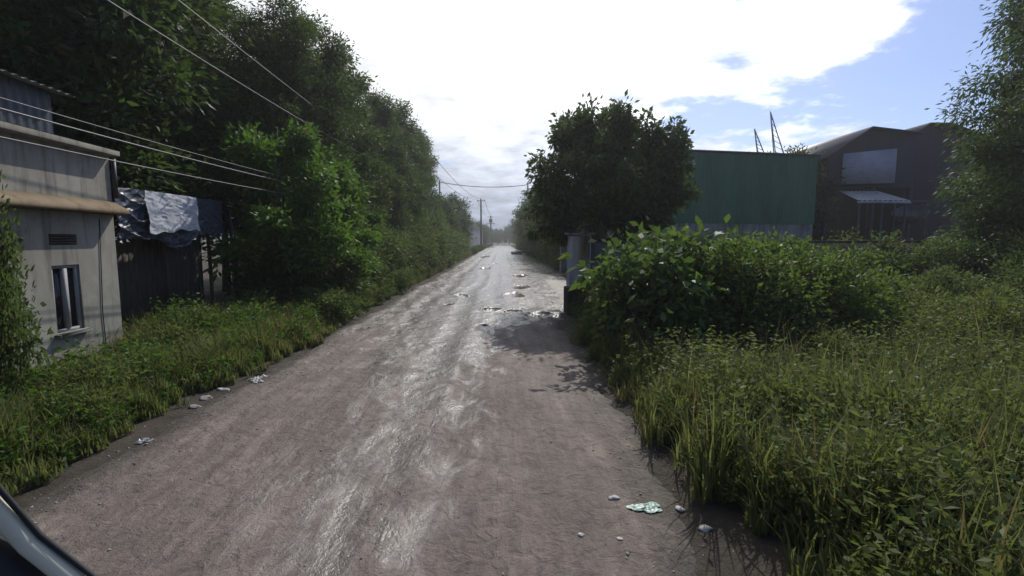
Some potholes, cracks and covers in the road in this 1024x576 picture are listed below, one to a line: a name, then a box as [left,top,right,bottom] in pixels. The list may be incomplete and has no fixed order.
pothole [516,311,564,320]
